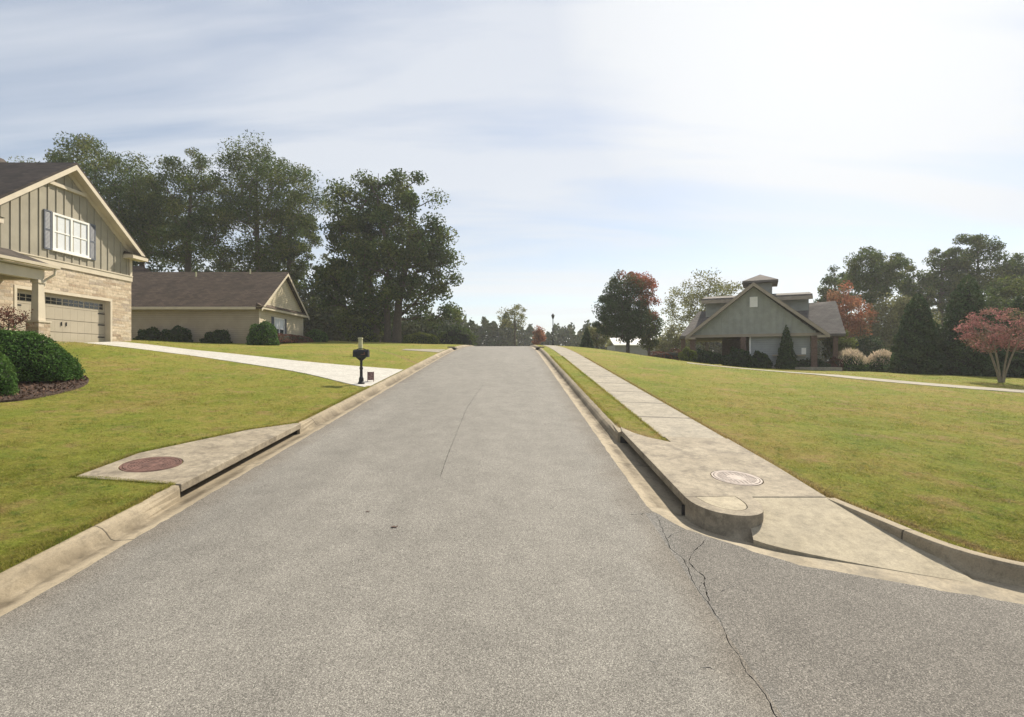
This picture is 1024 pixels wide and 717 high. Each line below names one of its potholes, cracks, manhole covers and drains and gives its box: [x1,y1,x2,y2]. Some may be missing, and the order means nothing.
manhole cover [119,457,182,472]
crack [630,513,777,717]
manhole cover [711,470,763,486]
